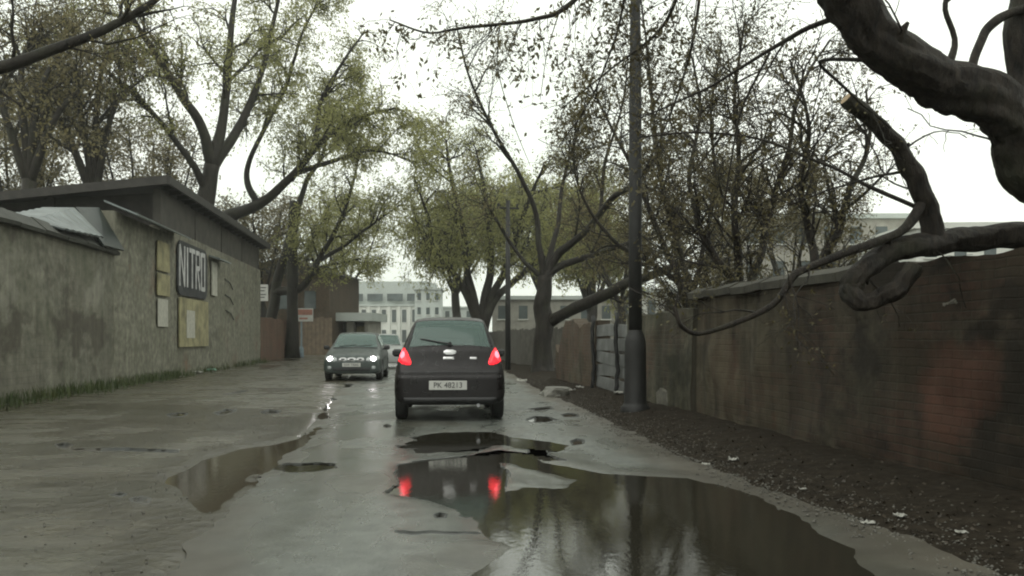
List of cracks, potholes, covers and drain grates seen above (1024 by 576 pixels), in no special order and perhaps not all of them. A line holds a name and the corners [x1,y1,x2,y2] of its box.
pothole [382,455,511,518]
pothole [274,462,338,473]
